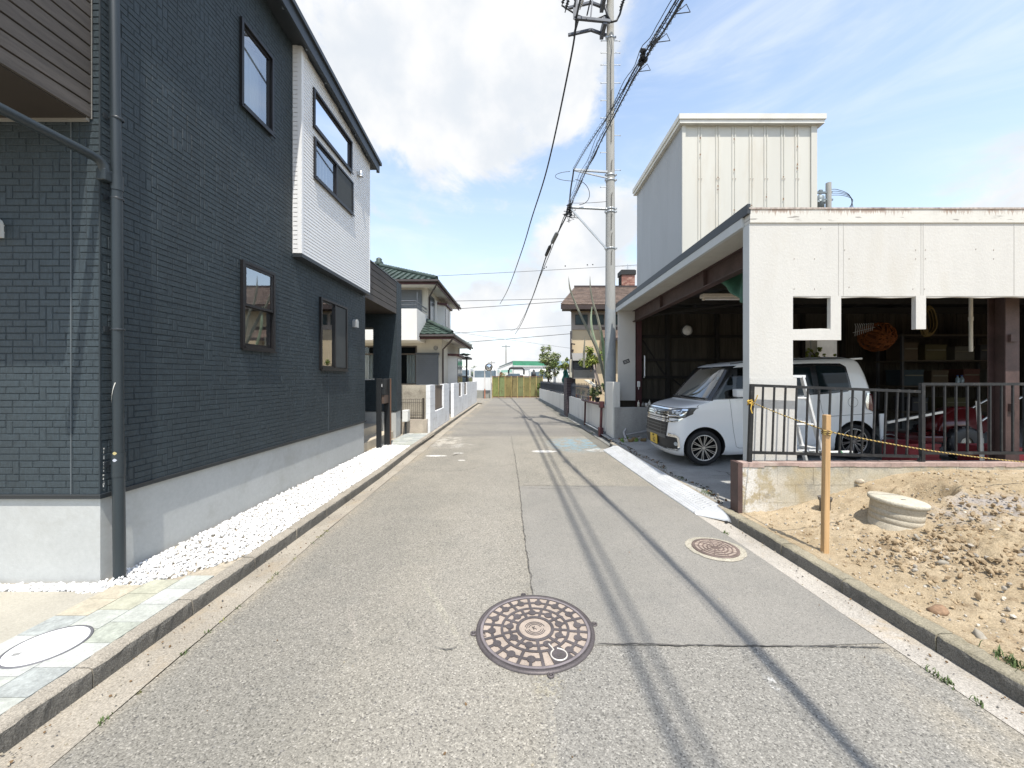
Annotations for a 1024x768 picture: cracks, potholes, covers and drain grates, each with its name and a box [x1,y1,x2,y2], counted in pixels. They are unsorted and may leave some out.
utility cover [0,625,94,669]
manhole cover [471,593,597,678]
manhole cover [685,537,747,562]
